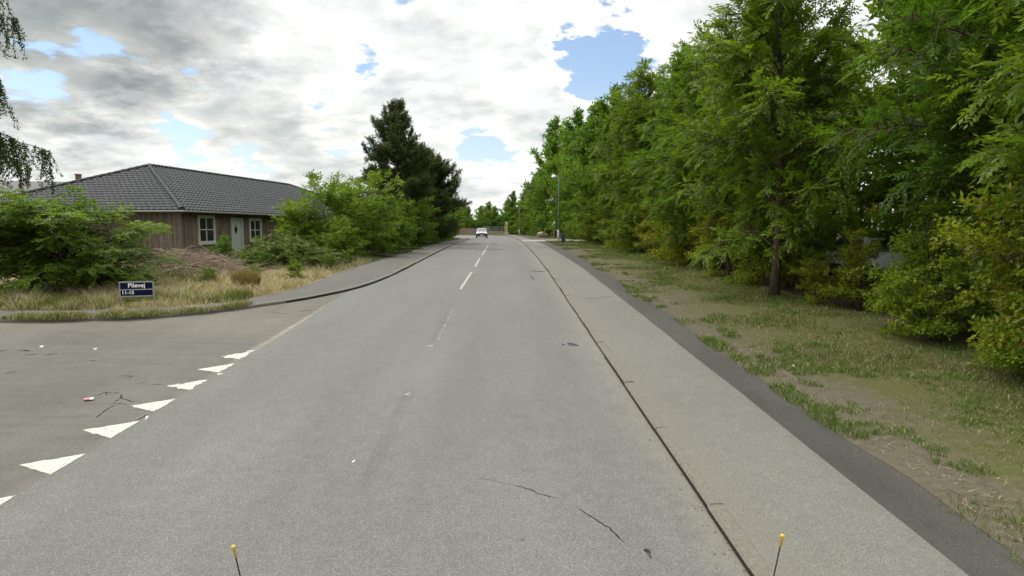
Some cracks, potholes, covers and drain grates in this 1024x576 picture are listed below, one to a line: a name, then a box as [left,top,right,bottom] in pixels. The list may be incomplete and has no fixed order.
crack [480,478,625,543]
crack [94,376,161,418]
